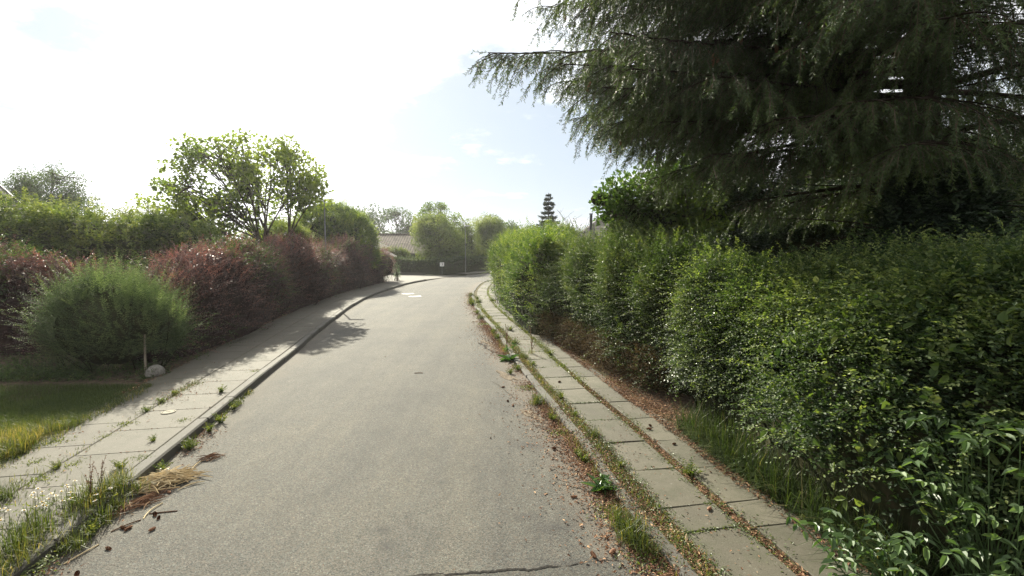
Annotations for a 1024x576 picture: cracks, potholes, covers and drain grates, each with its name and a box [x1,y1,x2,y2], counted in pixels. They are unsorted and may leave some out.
crack [412,558,631,576]
